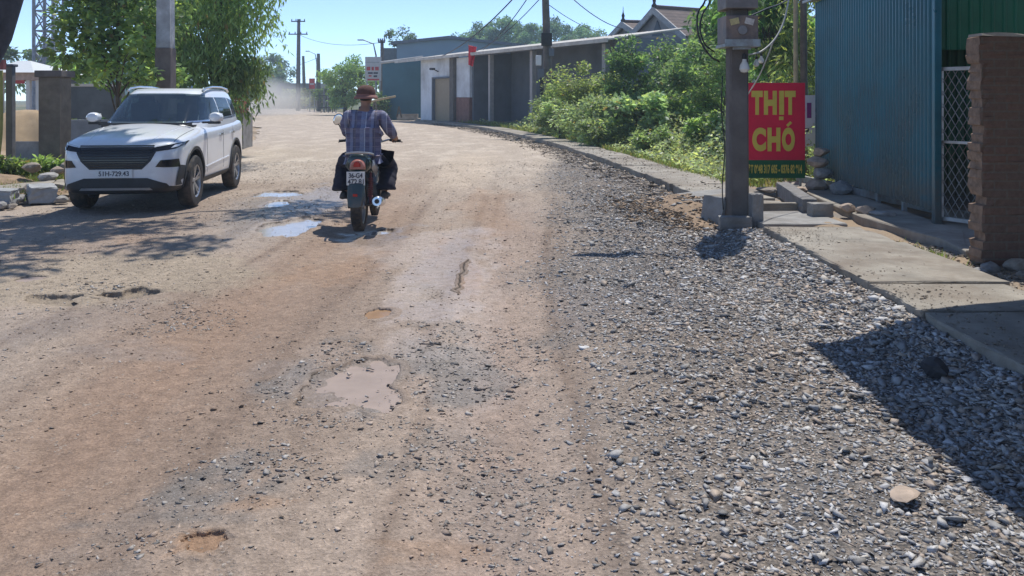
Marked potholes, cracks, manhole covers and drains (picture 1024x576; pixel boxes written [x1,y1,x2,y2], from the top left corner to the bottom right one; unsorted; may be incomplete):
pothole [164,525,245,563]
pothole [242,189,312,198]
pothole [11,292,117,310]
pothole [254,199,300,209]
pothole [245,215,332,239]
pothole [353,306,402,323]
crack [450,258,471,294]
pothole [283,354,414,419]
pothole [72,284,174,307]
